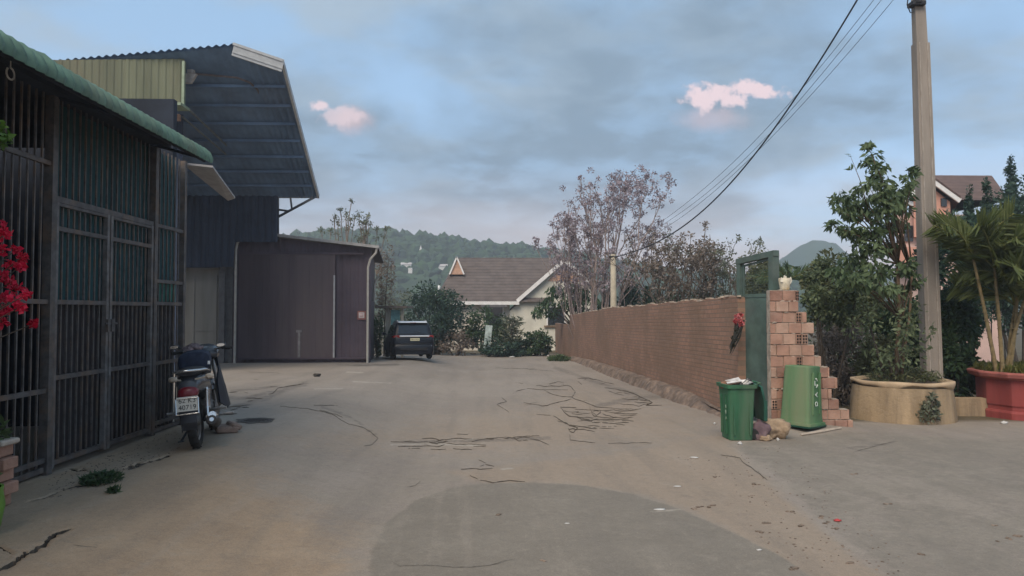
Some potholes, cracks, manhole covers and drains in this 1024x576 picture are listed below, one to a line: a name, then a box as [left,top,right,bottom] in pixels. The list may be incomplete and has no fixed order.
crack [518,378,653,444]
crack [391,434,547,483]
crack [0,529,92,571]
crack [225,372,378,446]
